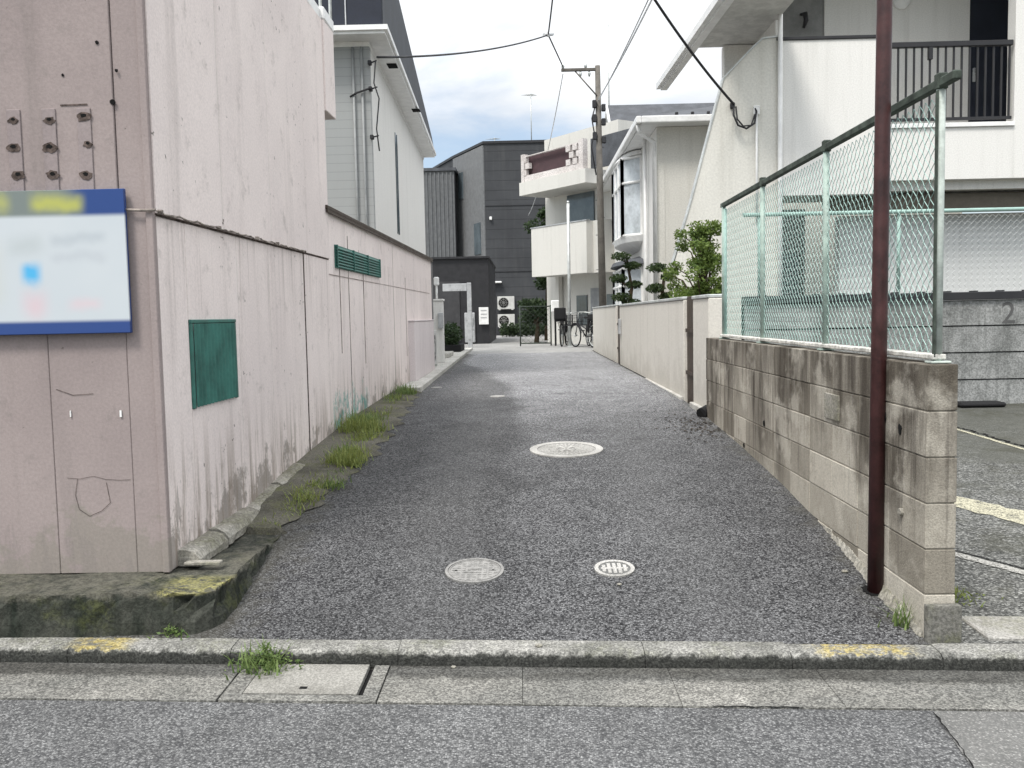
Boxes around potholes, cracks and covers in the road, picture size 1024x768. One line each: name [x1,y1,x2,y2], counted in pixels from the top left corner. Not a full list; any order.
manhole cover [445,558,504,584]
manhole cover [530,441,603,458]
crack [933,712,974,768]
